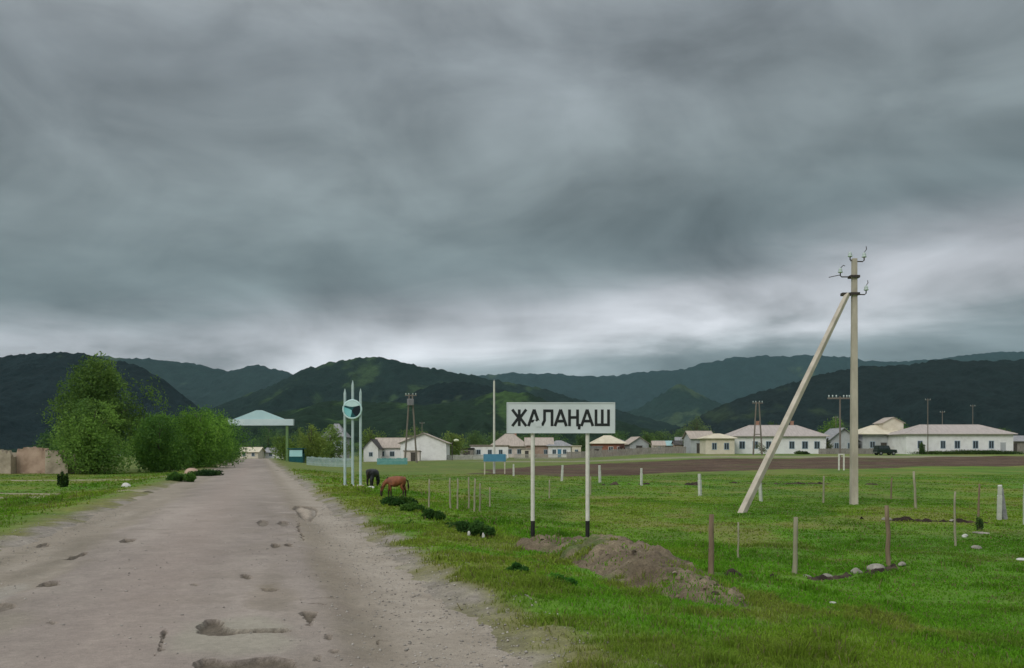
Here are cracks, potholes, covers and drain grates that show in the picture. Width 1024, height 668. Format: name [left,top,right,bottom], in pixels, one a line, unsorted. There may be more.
pothole [191,656,298,668]
pothole [195,619,292,636]
pothole [291,506,318,522]
pothole [0,602,17,612]
pothole [298,611,319,626]
